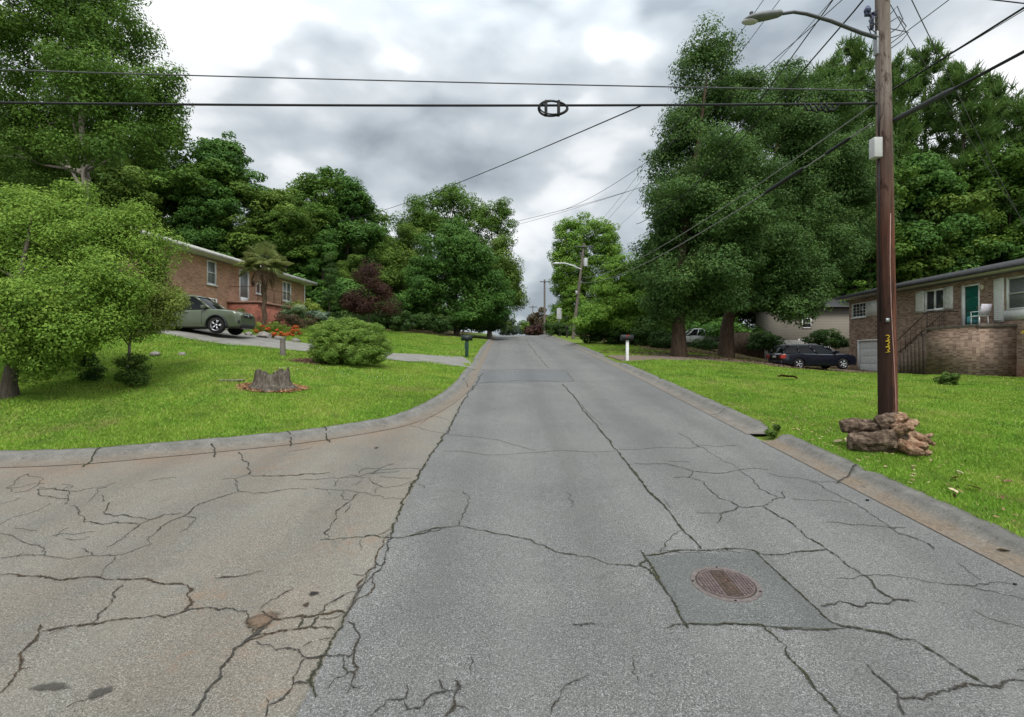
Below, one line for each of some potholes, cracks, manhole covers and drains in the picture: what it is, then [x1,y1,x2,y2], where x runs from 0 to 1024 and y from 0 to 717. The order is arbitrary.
crack [0,345,1024,717]
manhole cover [690,566,763,603]
pothole [248,612,278,628]
